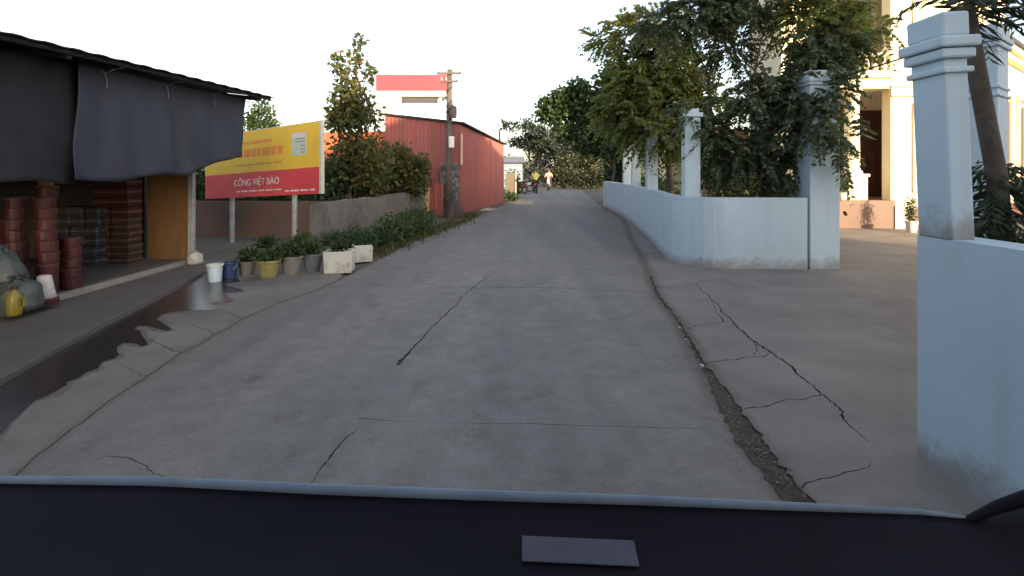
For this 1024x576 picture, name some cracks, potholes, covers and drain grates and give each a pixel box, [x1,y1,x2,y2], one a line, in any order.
crack [311,276,872,503]
crack [95,456,164,477]
